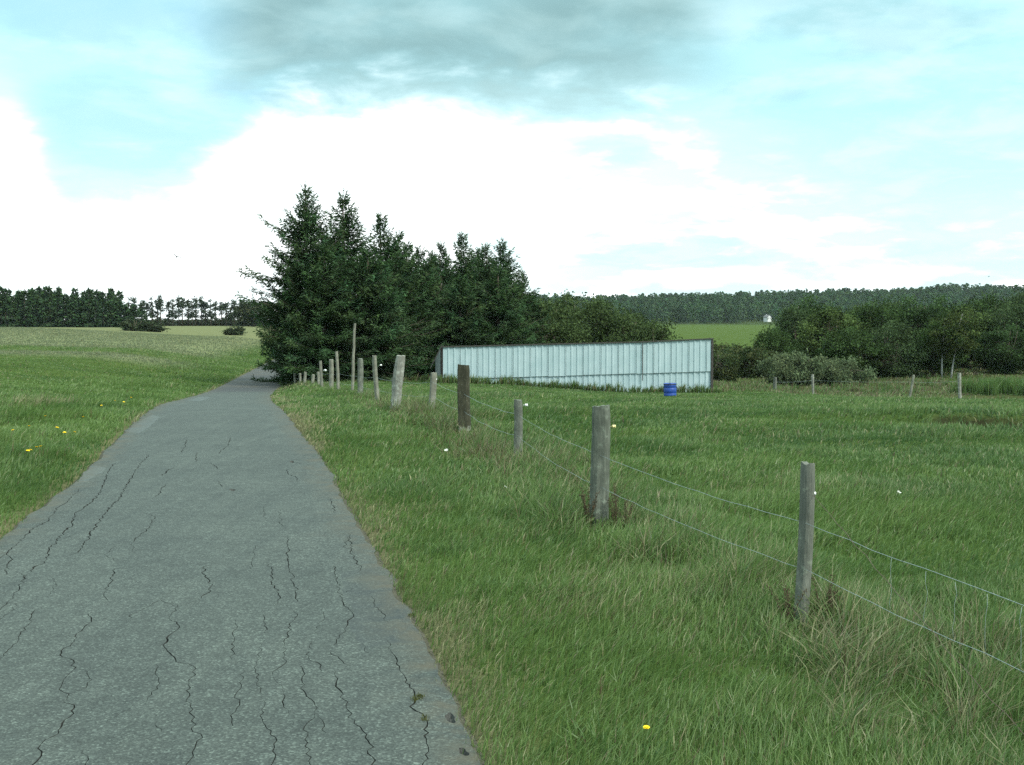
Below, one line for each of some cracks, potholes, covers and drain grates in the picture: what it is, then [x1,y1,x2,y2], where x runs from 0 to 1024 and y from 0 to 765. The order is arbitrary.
crack [0,438,231,765]
crack [230,508,376,765]
